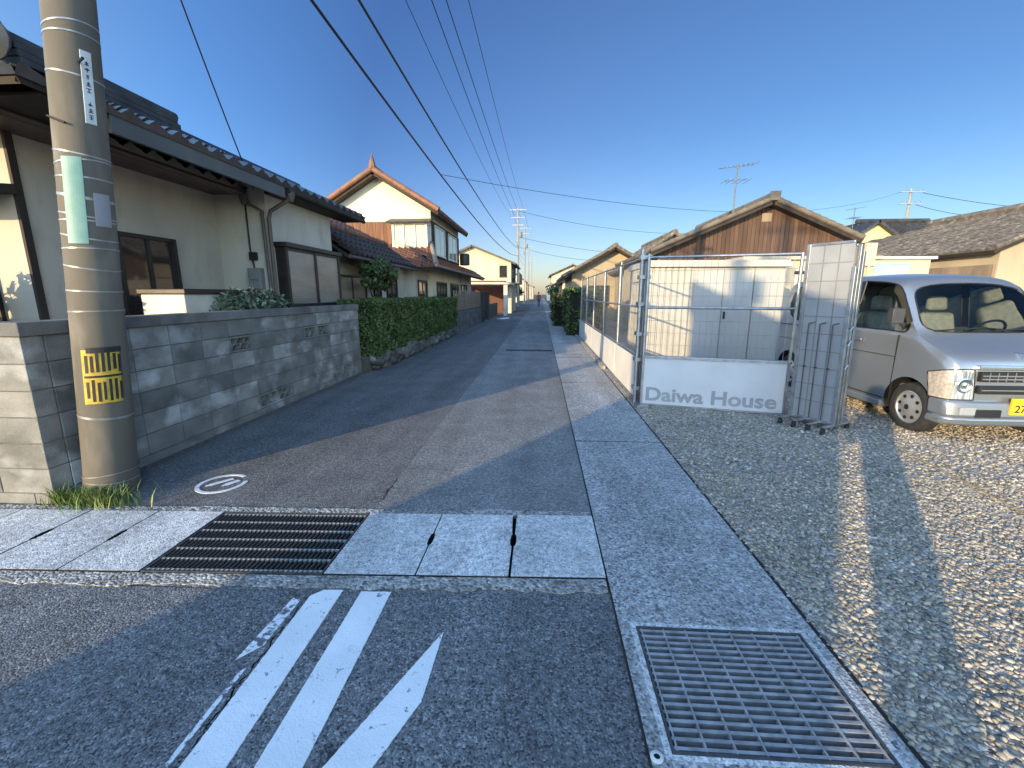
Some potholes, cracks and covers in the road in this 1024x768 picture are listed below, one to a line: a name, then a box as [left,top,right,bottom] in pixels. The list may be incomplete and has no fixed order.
drain grate [140,512,369,575]
drain grate [636,626,903,768]
